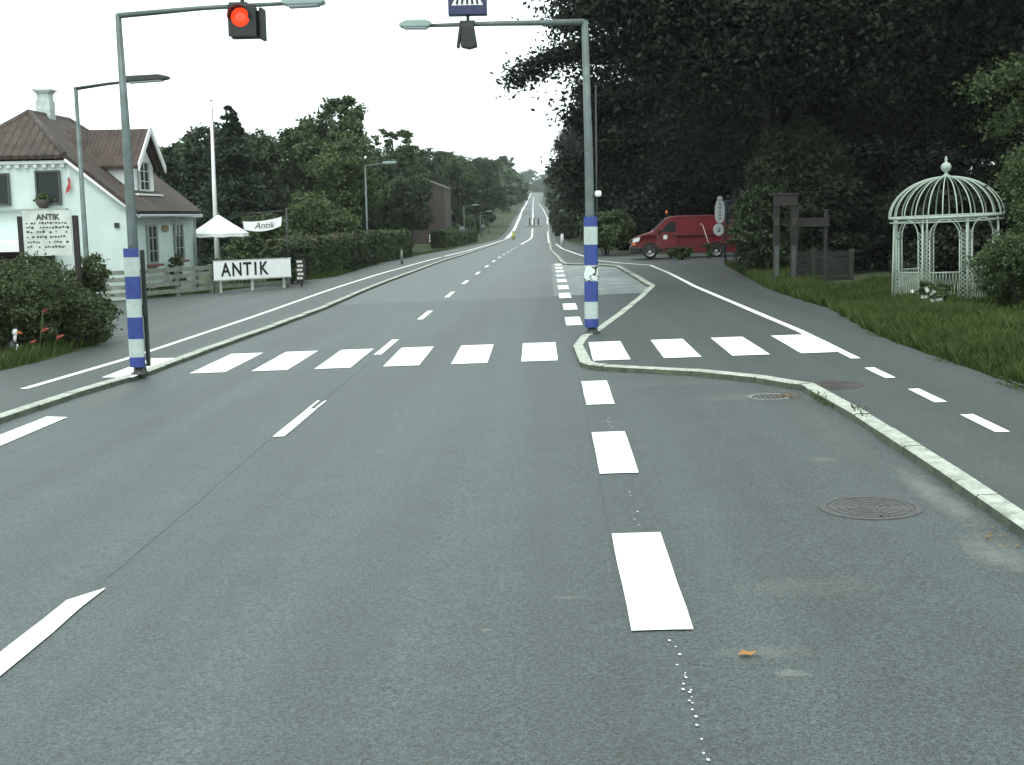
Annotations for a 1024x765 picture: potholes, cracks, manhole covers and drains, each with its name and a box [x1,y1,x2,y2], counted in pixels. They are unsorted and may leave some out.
drain grate [747,393,792,401]
manhole cover [802,381,863,390]
manhole cover [819,496,923,520]
